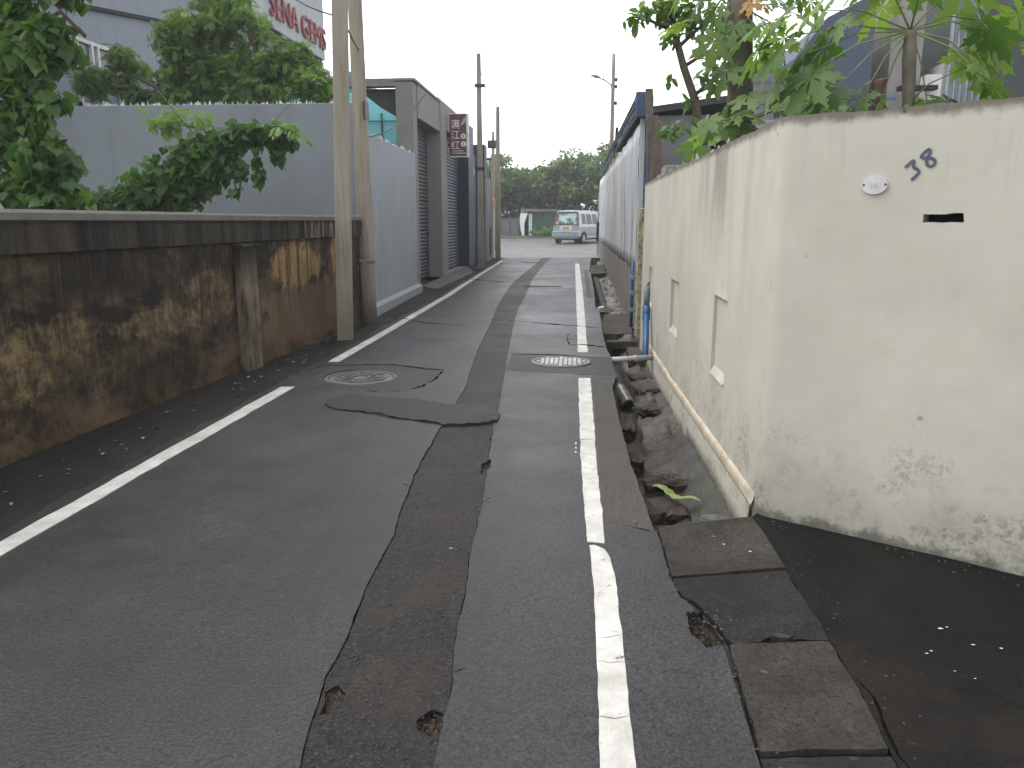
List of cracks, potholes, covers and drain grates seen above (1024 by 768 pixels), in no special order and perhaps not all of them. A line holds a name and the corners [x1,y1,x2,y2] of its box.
pothole [416,713,443,737]
pothole [321,688,345,715]
manhole cover [324,370,397,385]
pothole [688,616,723,648]
